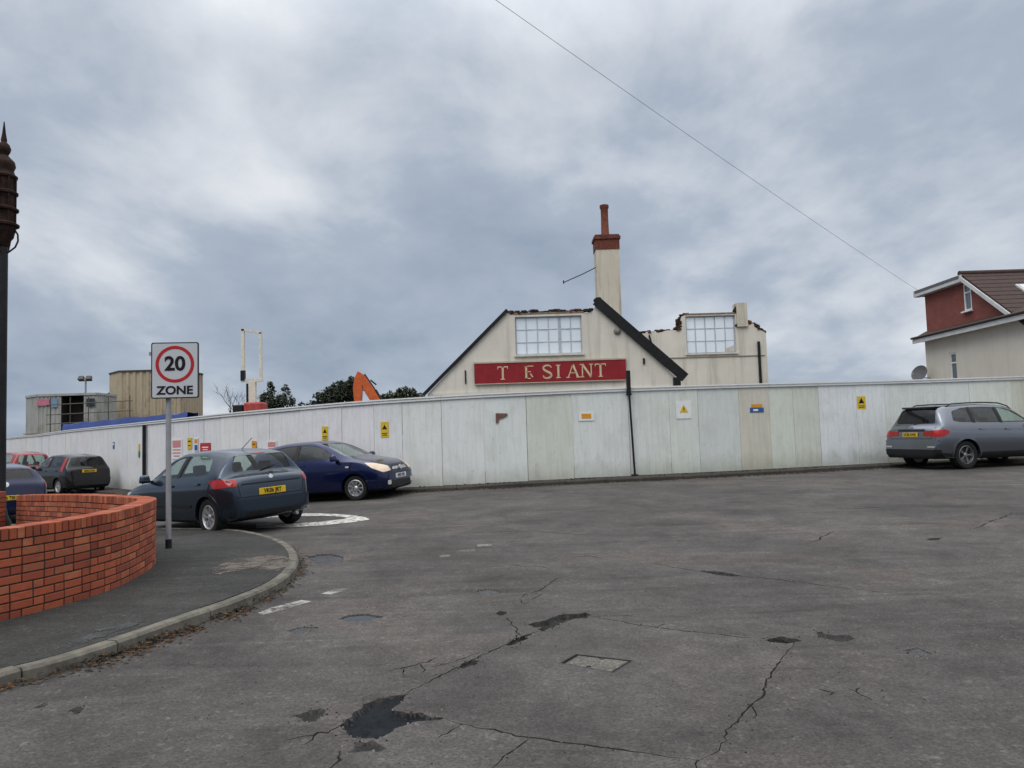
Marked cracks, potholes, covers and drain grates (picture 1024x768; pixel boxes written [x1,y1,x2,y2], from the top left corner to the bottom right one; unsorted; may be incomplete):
crack [388,658,448,678]
crack [438,643,794,768]
pothole [308,554,344,565]
crack [288,725,342,768]
pothole [527,612,590,632]
pothole [765,636,801,644]
pothole [816,631,854,642]
pothole [340,695,443,740]
manhole cover [559,654,634,673]
pothole [295,707,326,723]
crack [511,564,557,604]
